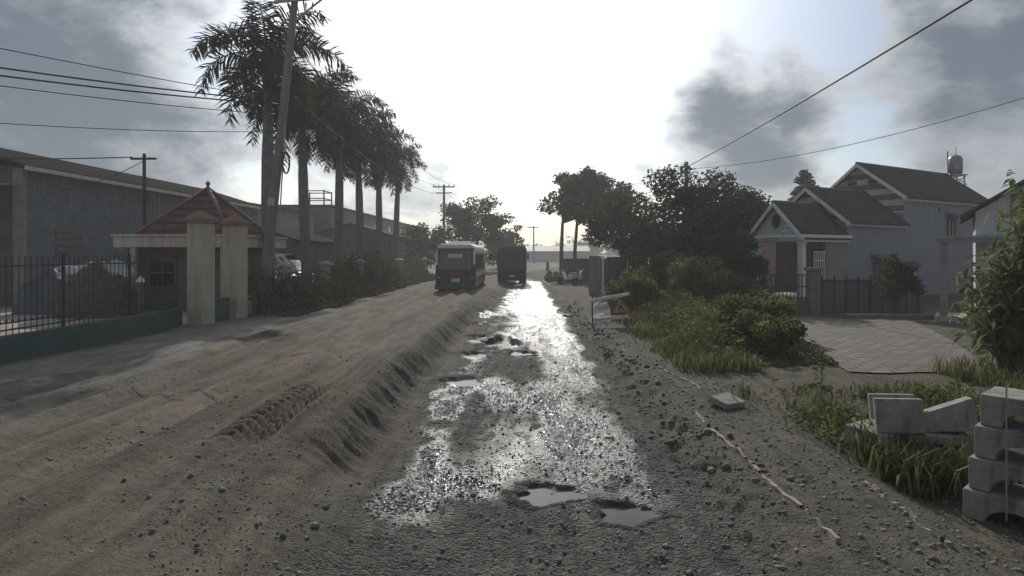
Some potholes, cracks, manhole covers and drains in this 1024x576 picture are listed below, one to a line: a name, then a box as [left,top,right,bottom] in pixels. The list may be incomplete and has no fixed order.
pothole [580,498,682,532]
pothole [422,374,496,388]
pothole [502,349,541,357]
pothole [502,478,612,511]
pothole [473,333,530,350]
